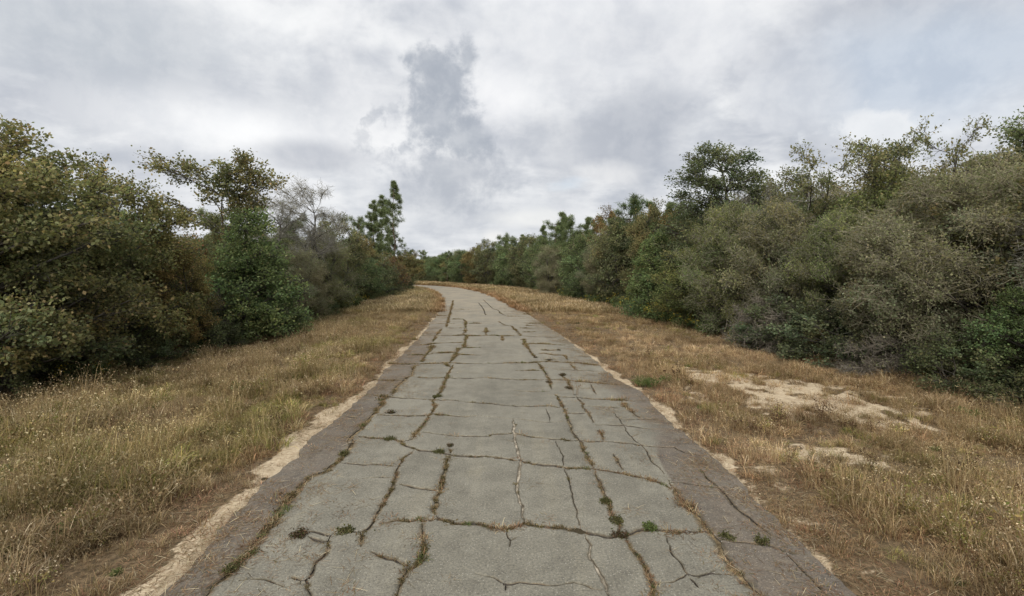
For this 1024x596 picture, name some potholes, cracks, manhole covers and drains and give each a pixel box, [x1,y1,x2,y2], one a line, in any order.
crack [292,532,331,596]
crack [344,303,824,596]
